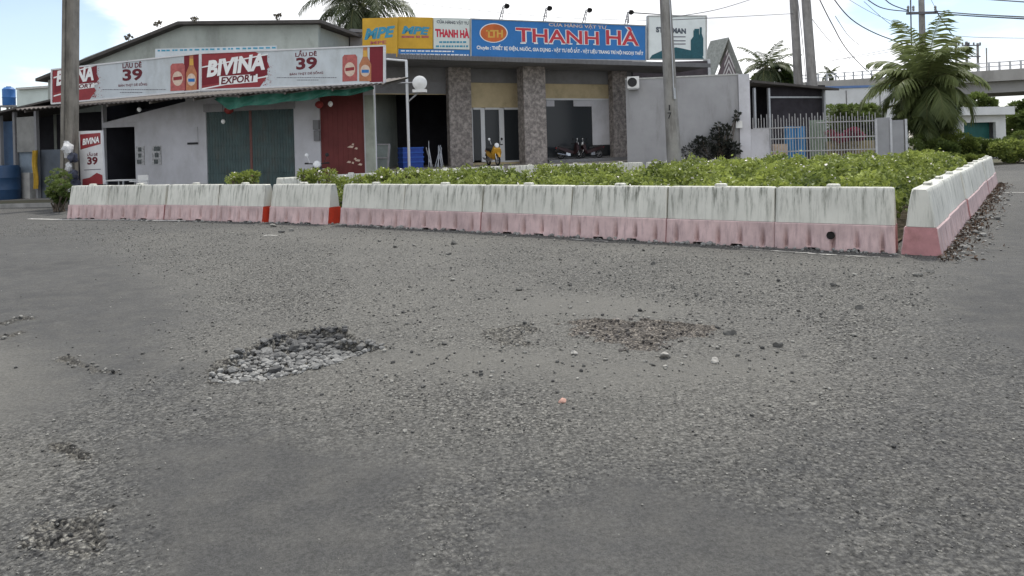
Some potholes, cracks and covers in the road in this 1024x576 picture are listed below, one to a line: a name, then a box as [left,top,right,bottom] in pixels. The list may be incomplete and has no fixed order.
pothole [554,317,717,351]
pothole [13,504,117,559]
pothole [205,325,388,385]
pothole [481,321,540,347]
